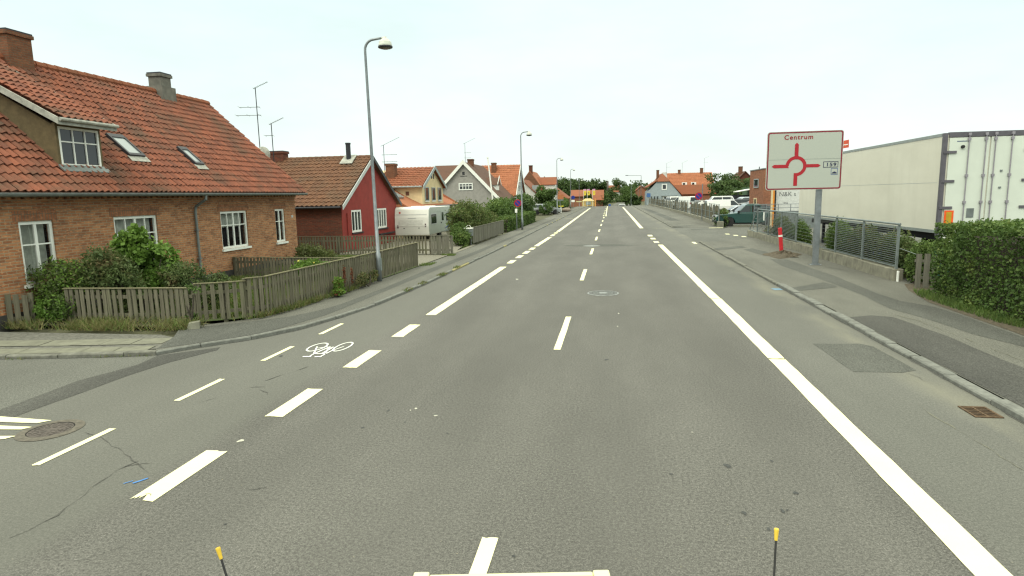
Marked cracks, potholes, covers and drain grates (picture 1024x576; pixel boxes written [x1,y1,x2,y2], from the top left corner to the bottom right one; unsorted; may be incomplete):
crack [85,432,149,473]
manhole cover [14,419,85,441]
crack [928,412,1021,469]
drain grate [958,406,1004,418]
